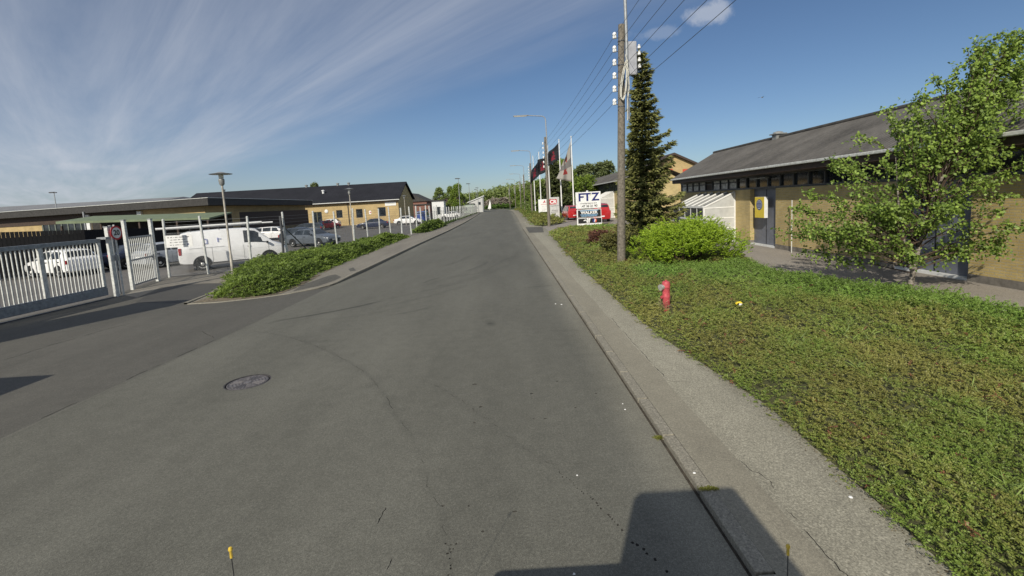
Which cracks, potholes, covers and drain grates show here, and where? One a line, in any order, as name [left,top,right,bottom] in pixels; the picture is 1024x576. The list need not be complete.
manhole cover [223,374,271,390]
crack [265,332,457,576]
crack [787,511,848,576]
